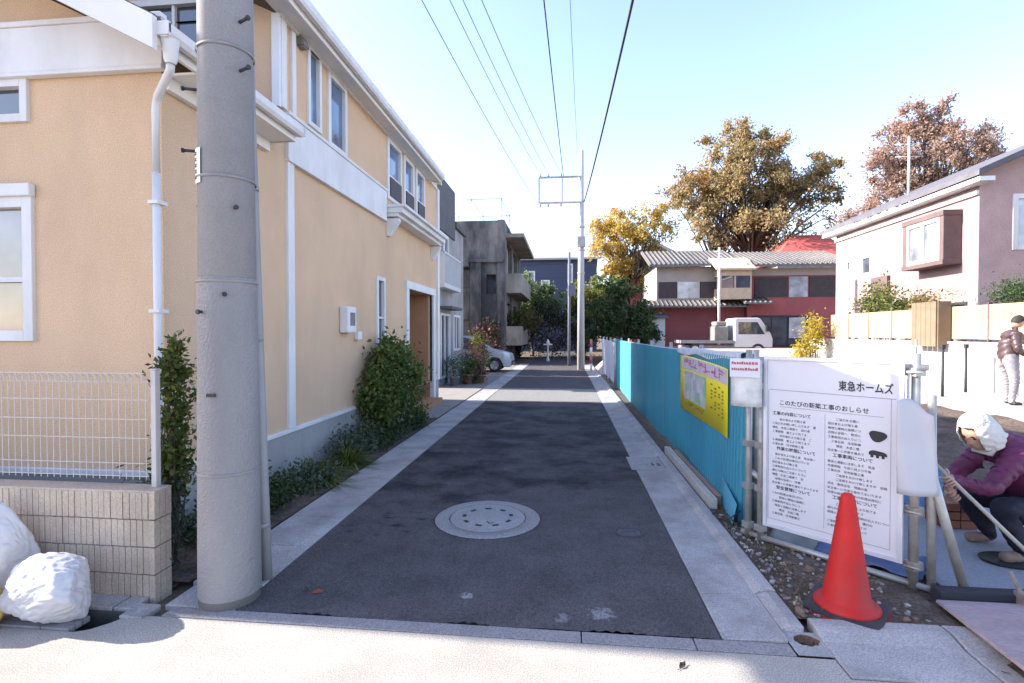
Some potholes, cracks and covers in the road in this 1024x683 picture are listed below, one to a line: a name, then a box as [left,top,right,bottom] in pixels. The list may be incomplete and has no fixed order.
manhole cover [434,501,541,540]
utility cover [614,528,644,537]
